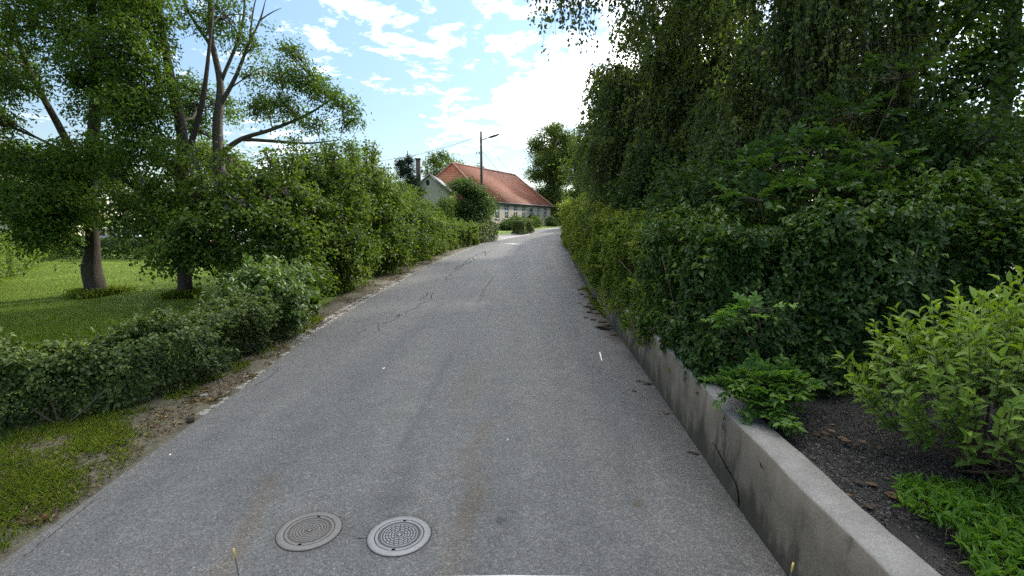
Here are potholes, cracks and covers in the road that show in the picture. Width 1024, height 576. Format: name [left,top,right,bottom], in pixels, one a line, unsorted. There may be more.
crack [354,249,499,341]
manhole cover [366,516,432,557]
manhole cover [275,512,343,552]
